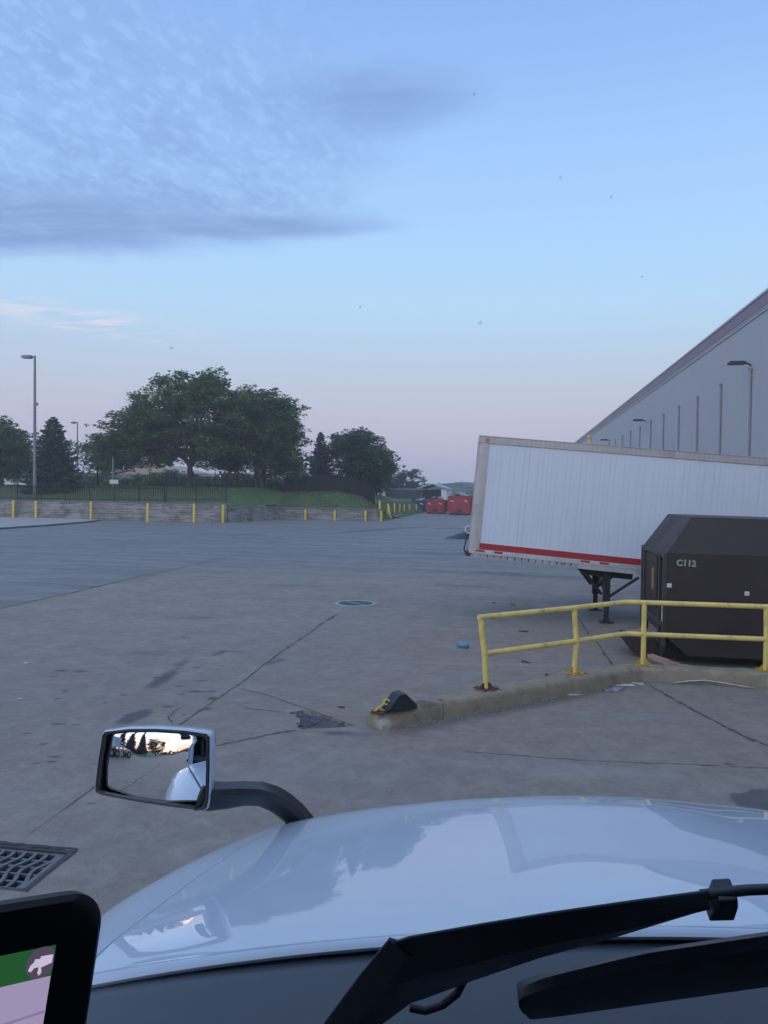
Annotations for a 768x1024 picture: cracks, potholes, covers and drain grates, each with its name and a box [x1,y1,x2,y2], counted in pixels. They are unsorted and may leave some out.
drain grate [0,841,78,892]
